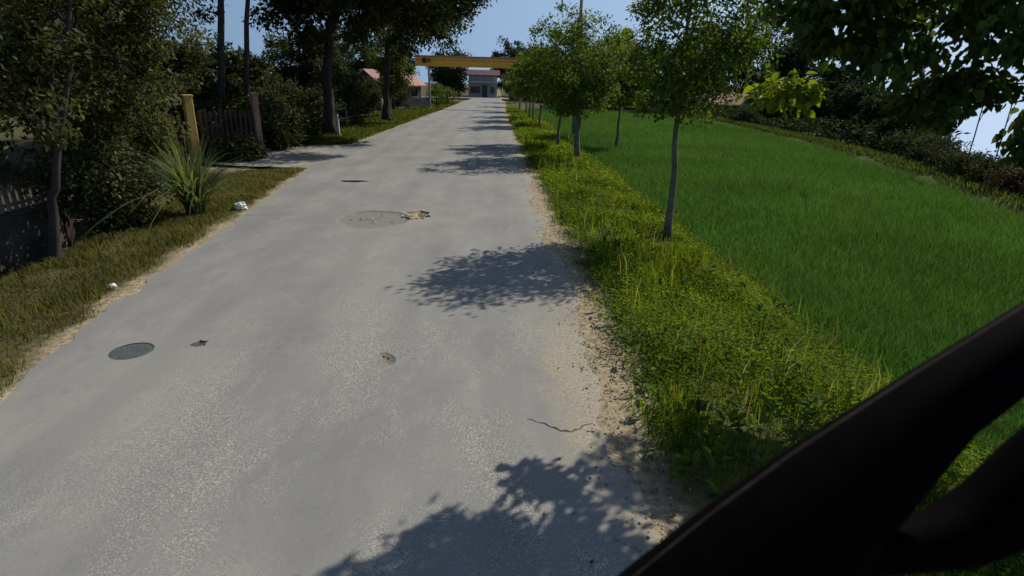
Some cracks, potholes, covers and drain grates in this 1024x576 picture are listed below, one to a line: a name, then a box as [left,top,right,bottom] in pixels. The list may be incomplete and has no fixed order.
manhole cover [108,342,155,360]
pothole [402,210,431,220]
crack [528,419,593,433]
pothole [379,352,396,365]
